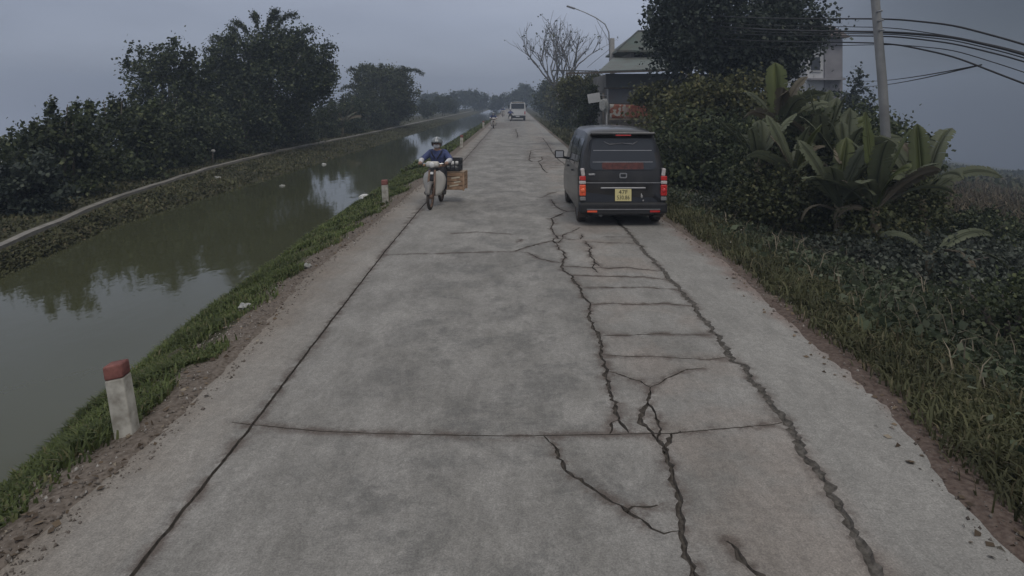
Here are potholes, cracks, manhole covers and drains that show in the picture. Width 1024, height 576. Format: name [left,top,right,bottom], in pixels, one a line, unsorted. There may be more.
crack [726,541,766,576]
crack [516,192,725,576]
